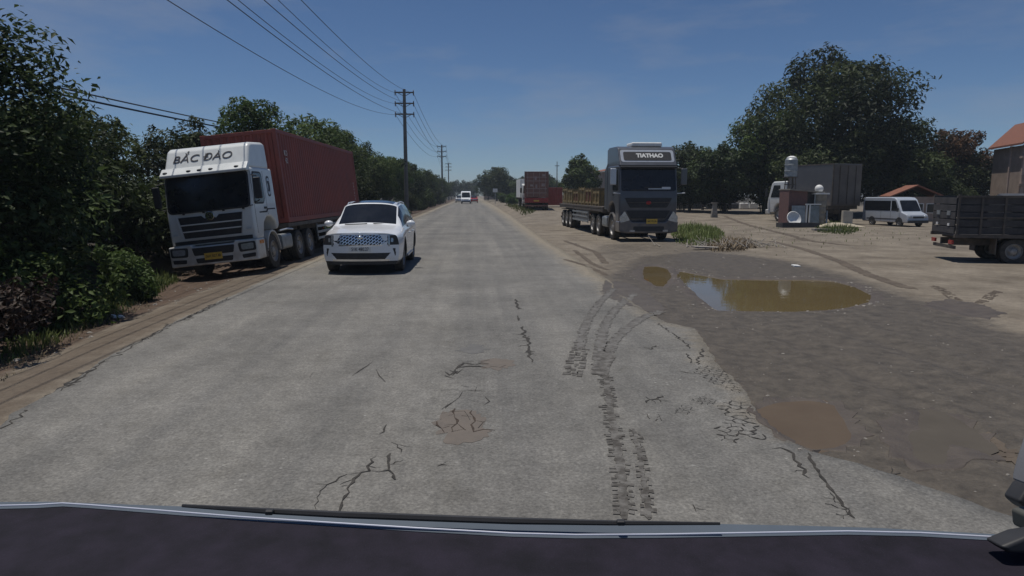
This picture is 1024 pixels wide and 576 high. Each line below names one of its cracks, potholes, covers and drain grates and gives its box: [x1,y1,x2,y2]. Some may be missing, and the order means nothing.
pothole [432,410,491,445]
crack [314,424,411,511]
pothole [674,268,885,314]
pothole [629,264,680,288]
crack [645,323,855,518]
crack [436,299,536,432]
pothole [746,395,875,456]
